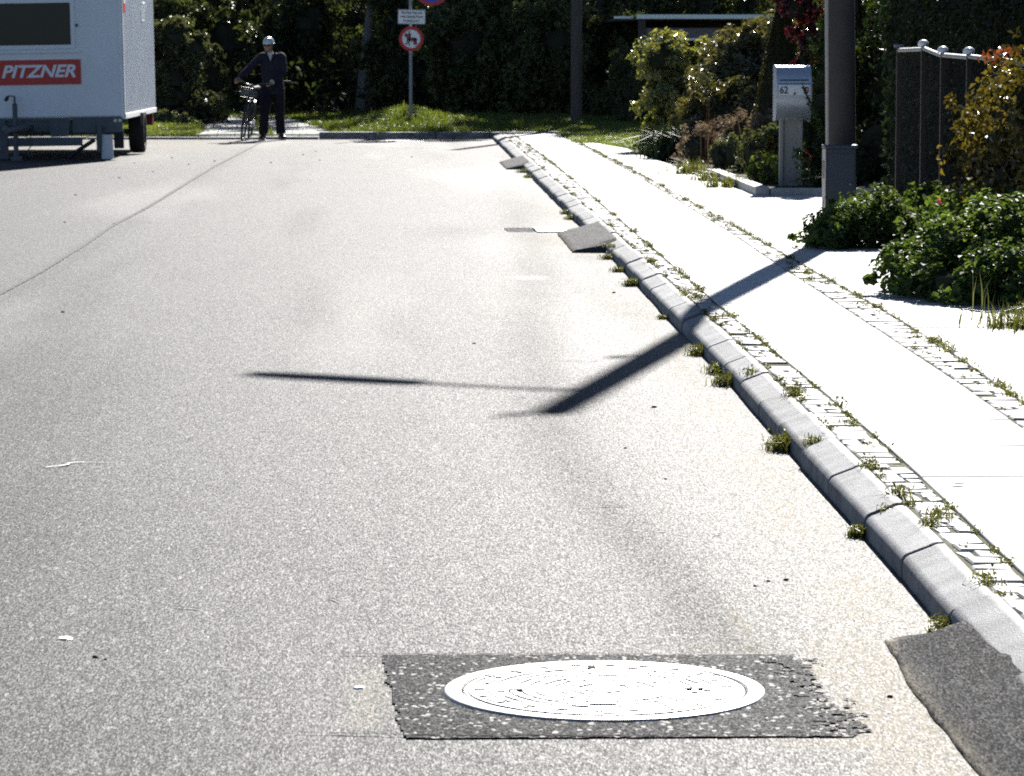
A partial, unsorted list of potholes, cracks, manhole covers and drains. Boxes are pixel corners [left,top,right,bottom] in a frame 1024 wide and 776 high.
manhole cover [443,661,765,722]
